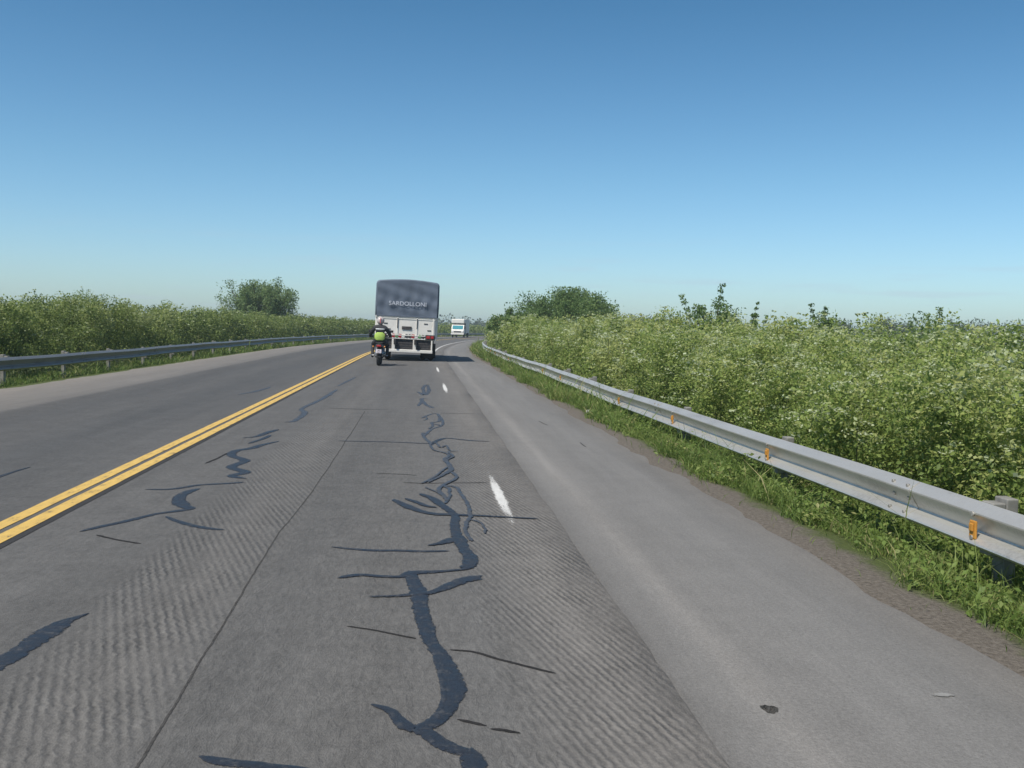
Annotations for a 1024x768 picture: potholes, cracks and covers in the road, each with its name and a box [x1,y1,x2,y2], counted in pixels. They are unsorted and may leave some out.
pothole [760,705,778,714]
